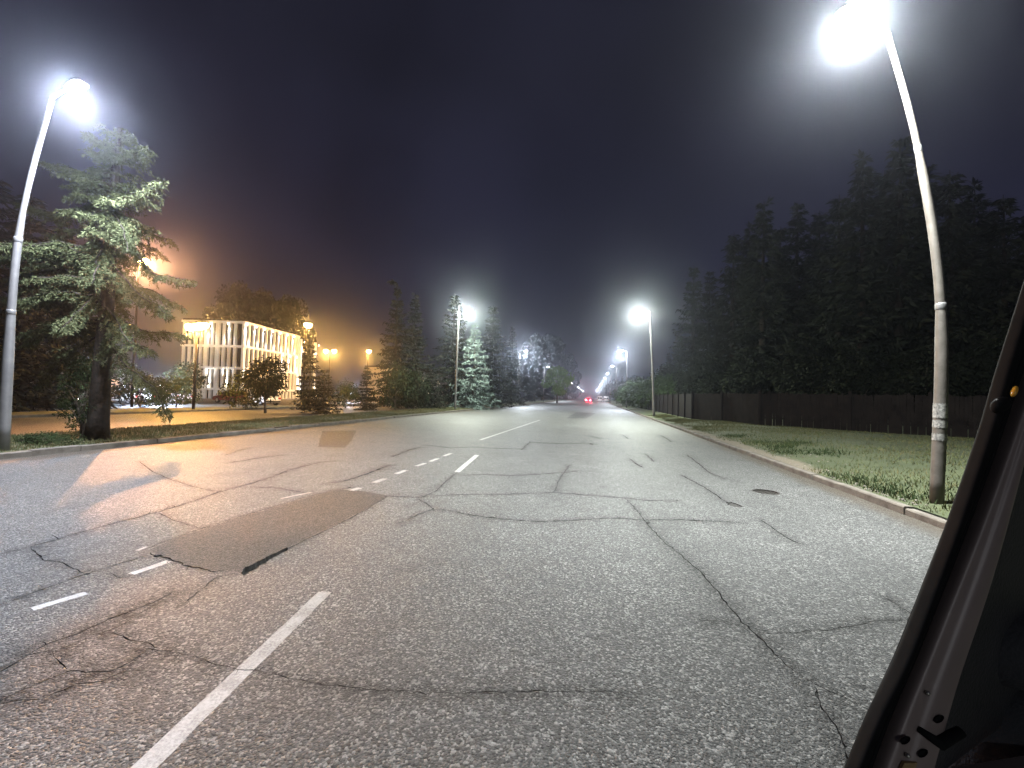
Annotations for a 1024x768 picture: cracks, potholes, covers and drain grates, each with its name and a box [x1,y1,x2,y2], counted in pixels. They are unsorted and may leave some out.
crack [154,445,502,546]
crack [2,466,910,761]
